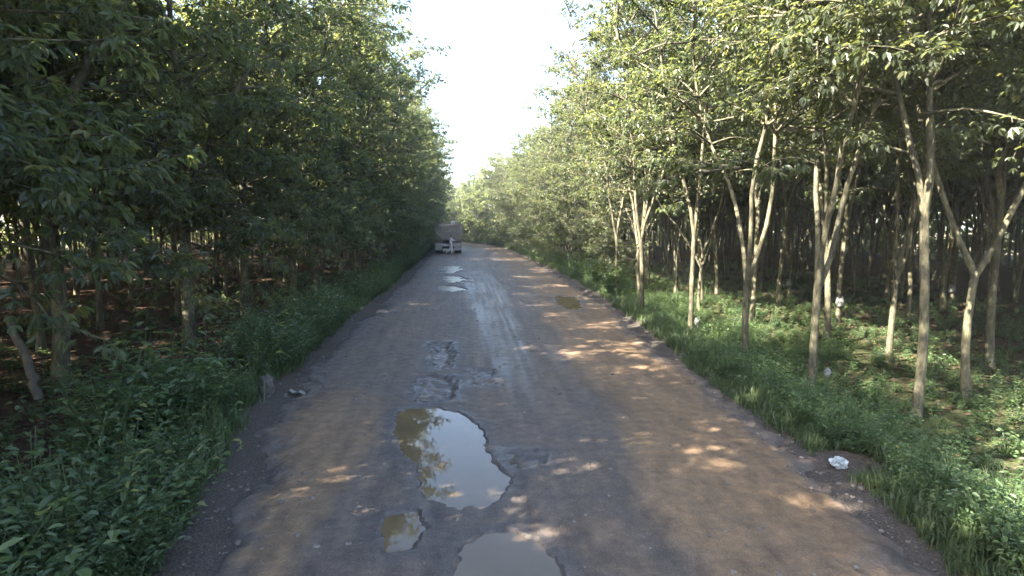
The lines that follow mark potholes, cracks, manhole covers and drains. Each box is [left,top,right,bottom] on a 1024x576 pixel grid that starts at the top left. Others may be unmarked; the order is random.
pothole [390,406,516,511]
pothole [434,275,472,283]
pothole [412,373,463,403]
pothole [551,295,587,311]
pothole [464,367,502,386]
pothole [422,340,461,371]
pothole [435,265,466,274]
pothole [503,448,555,470]
pothole [377,507,431,554]
